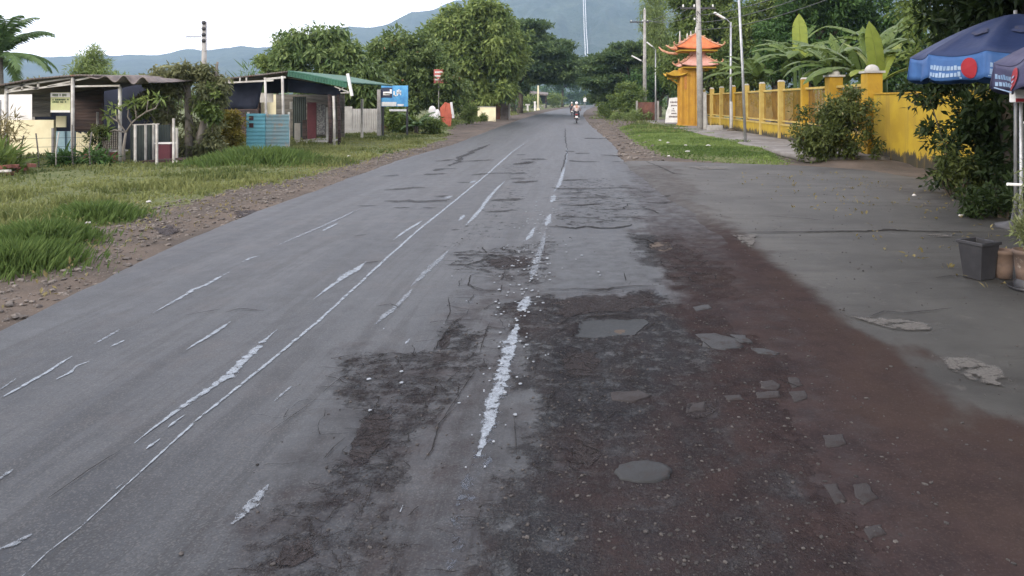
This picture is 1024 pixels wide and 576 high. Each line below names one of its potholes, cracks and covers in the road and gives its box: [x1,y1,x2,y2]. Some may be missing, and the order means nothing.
pothole [575,318,649,338]
crack [228,241,550,571]
